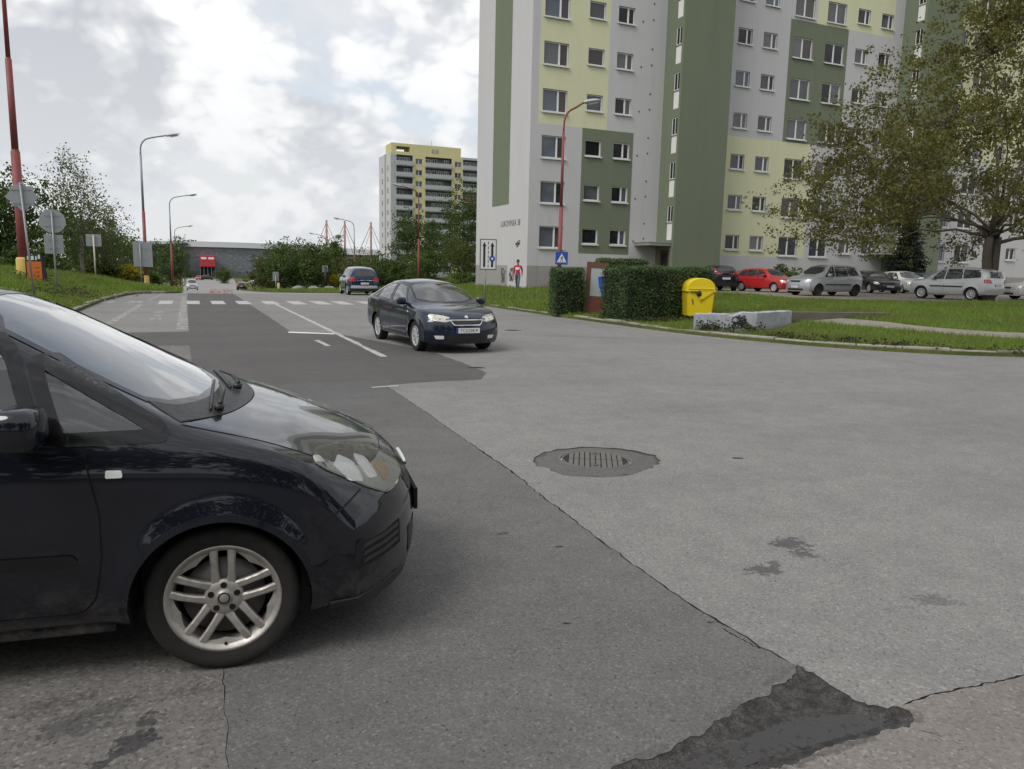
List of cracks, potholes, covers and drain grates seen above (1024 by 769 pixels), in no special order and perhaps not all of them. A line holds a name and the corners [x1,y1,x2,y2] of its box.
pothole [611,665,914,769]
crack [903,675,1024,736]
manhole cover [533,447,661,477]
